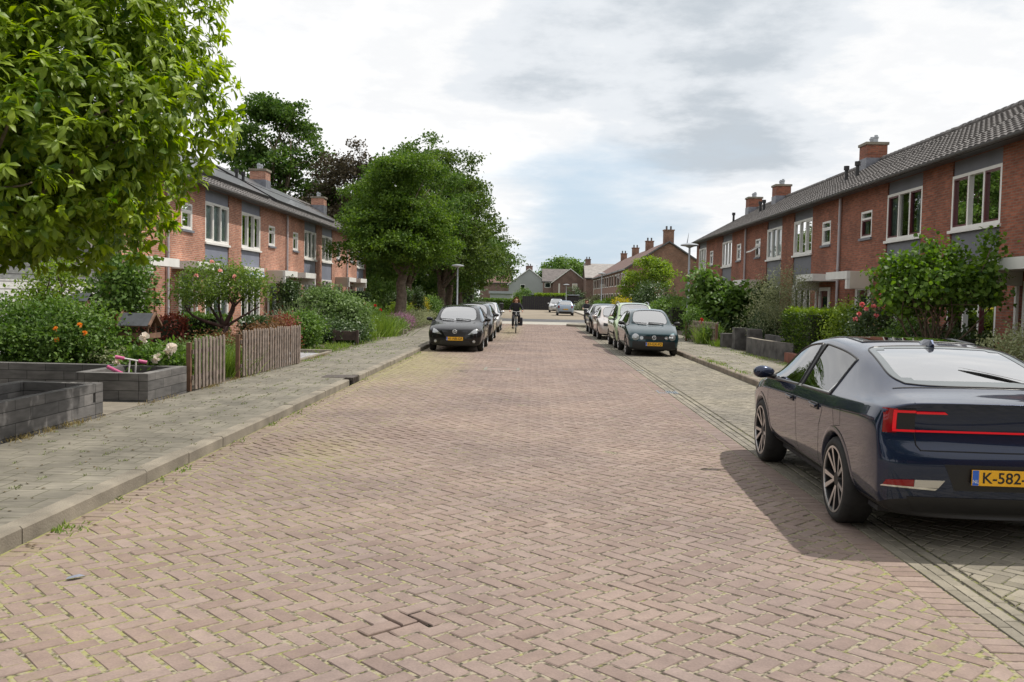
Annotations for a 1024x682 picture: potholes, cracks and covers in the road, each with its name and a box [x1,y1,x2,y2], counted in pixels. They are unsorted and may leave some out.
drain grate [322,375,358,386]
